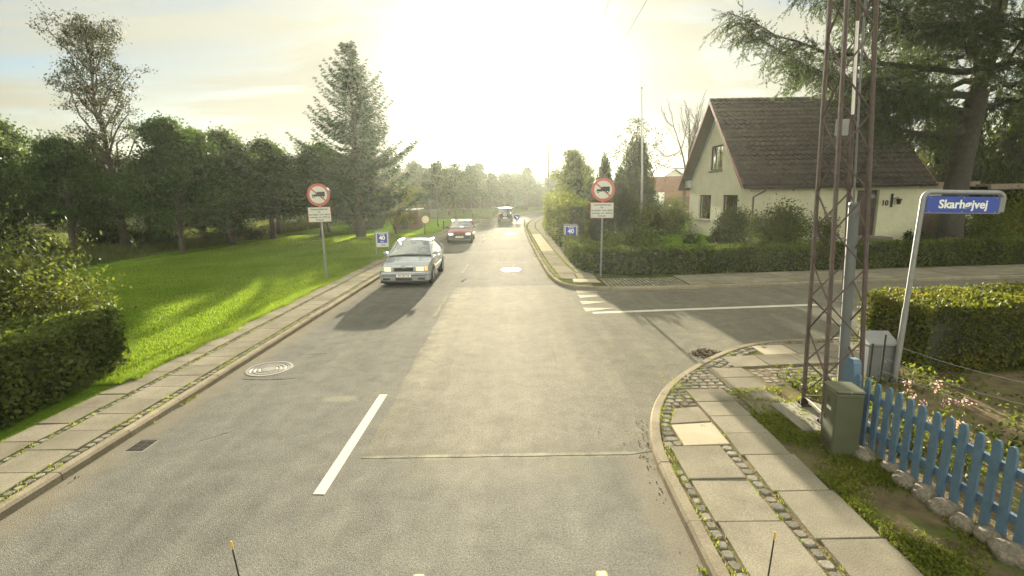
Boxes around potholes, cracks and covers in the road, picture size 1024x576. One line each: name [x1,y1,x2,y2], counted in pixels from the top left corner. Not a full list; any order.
drain grate [123,439,160,452]
manhole cover [245,361,294,377]
